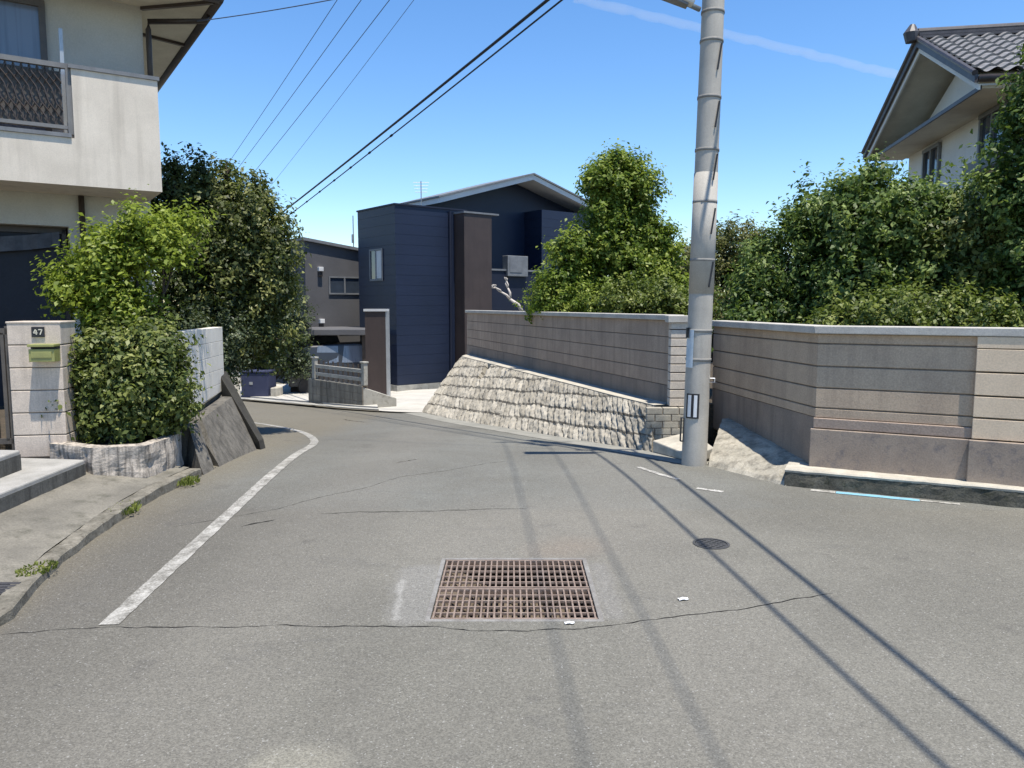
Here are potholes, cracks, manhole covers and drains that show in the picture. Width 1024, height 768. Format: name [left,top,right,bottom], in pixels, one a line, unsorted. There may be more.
drain grate [424,558,605,622]
manhole cover [693,538,730,550]
crack [167,459,526,528]
crack [2,593,830,635]
